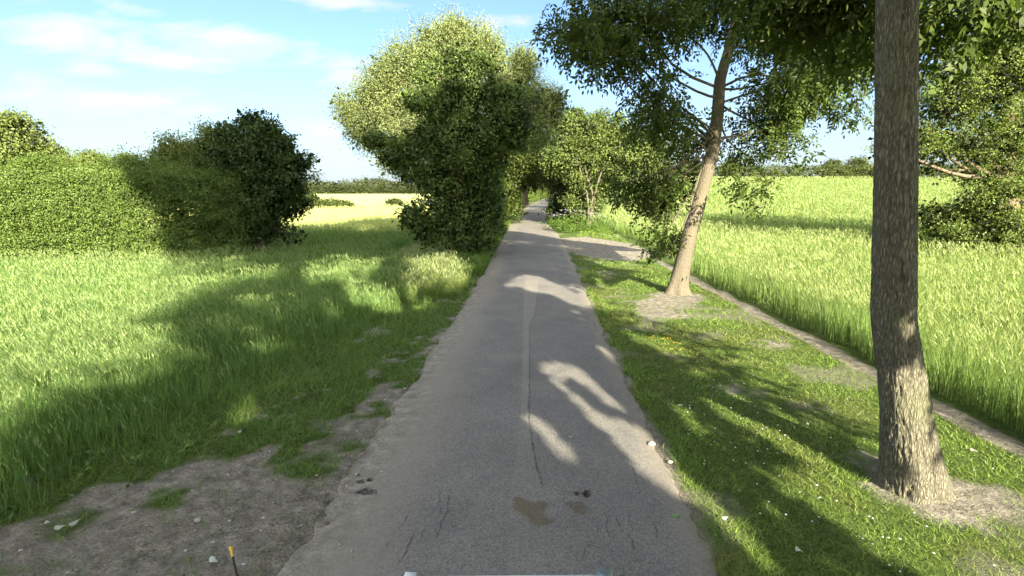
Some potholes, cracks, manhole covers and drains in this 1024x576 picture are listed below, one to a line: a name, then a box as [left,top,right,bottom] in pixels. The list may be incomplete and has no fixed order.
crack [583,467,659,562]
pothole [355,487,377,495]
crack [384,489,451,564]
crack [528,297,543,487]
